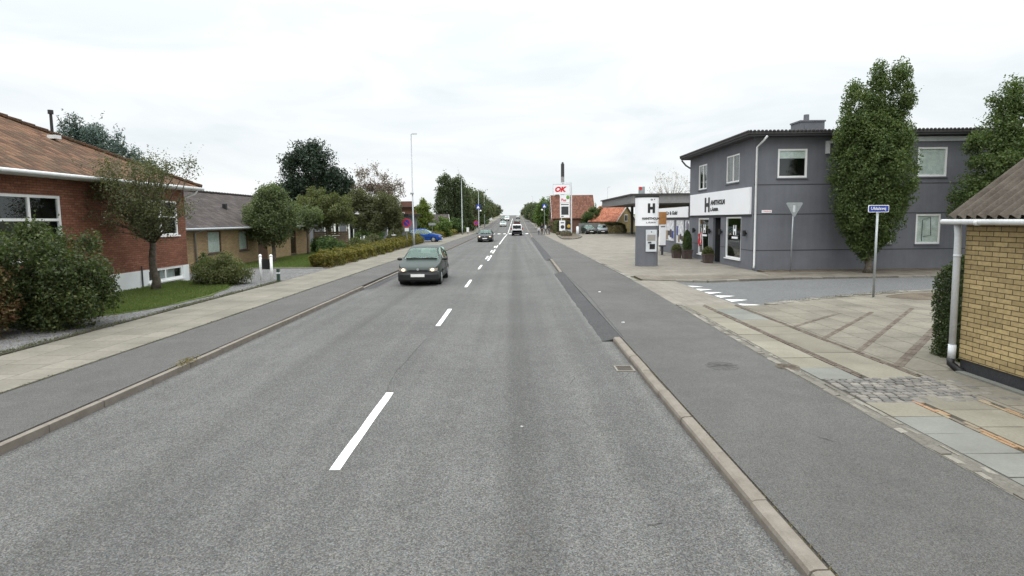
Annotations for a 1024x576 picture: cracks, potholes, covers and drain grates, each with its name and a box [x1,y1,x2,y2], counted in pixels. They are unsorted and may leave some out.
manhole cover [705,362,739,370]
